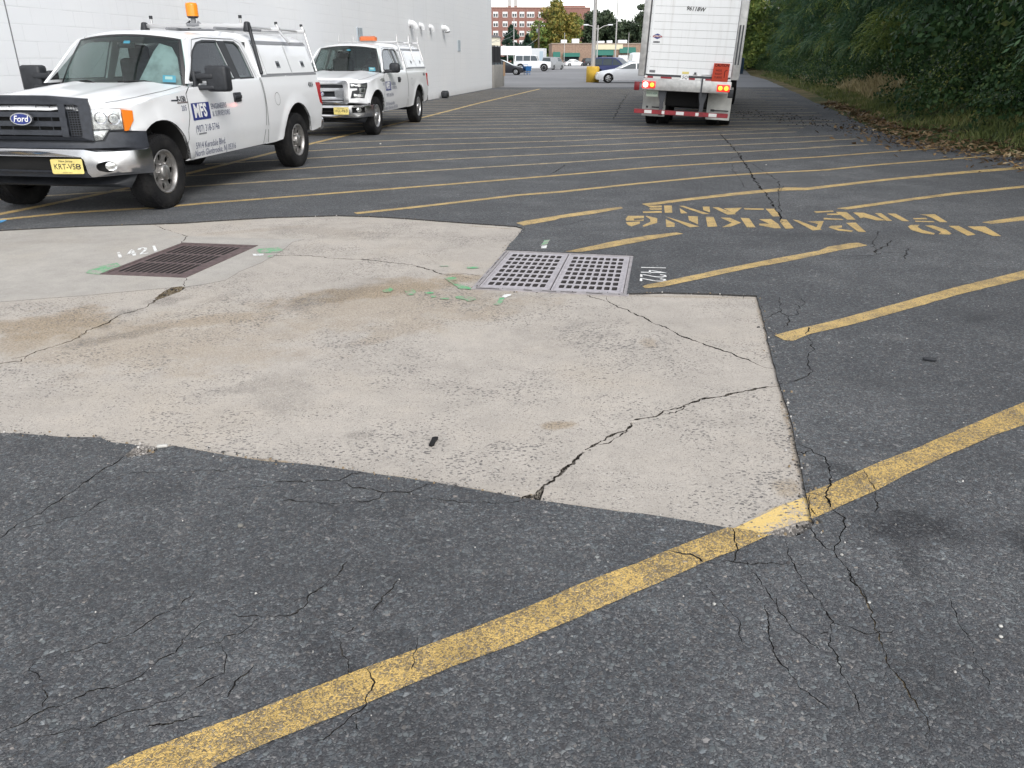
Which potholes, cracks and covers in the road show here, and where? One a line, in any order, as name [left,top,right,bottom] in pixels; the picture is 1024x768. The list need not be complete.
drain grate [471,250,633,297]
crack [951,601,990,688]
crack [644,447,930,747]
drain grate [100,242,258,278]
crack [319,674,375,741]
crack [0,563,346,740]
crack [526,297,815,496]
crack [722,135,782,220]
crack [0,457,521,538]
